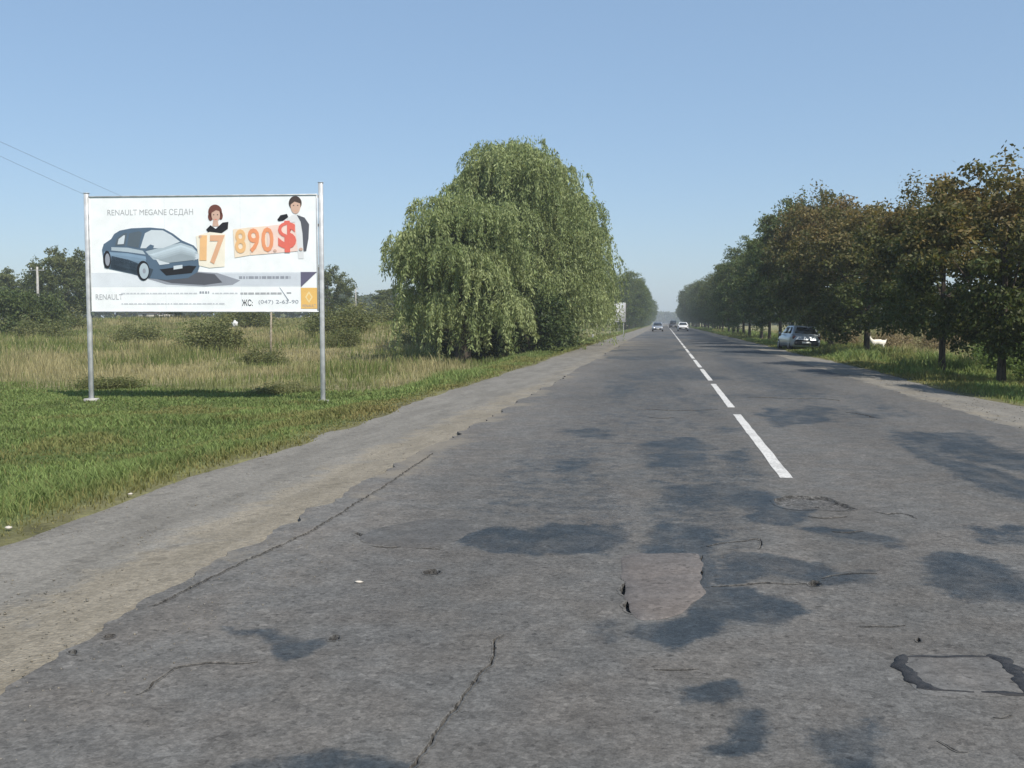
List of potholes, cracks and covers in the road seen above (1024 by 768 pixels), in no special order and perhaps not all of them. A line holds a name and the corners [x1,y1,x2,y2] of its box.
crack [407,634,505,768]
crack [699,538,877,587]
crack [137,661,257,695]
crack [808,511,916,533]
crack [152,453,439,606]
